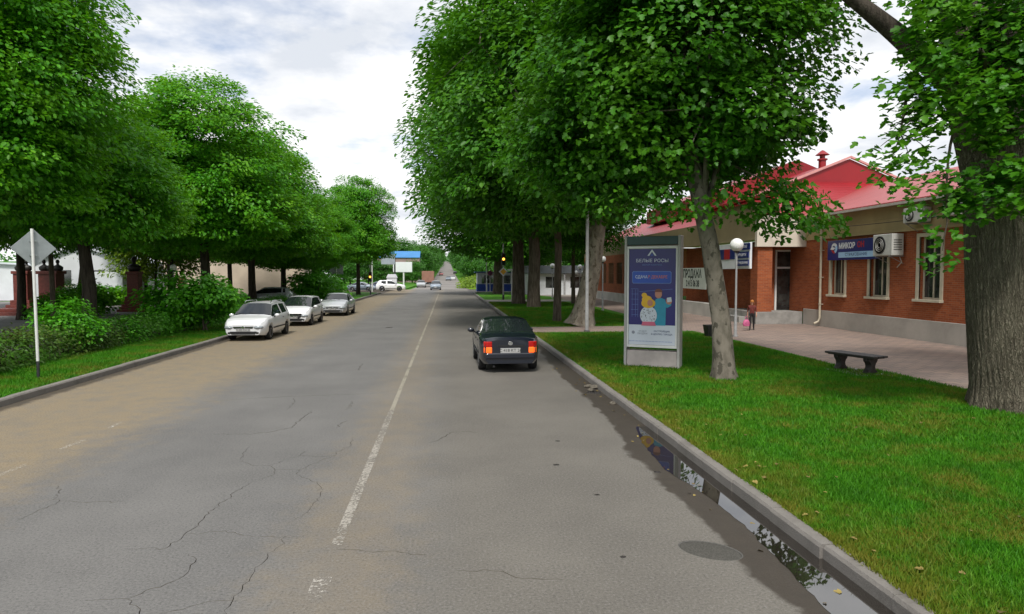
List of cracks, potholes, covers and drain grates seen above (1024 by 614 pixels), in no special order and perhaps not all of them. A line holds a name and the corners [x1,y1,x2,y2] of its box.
crack [459,569,561,580]
manhole cover [678,540,743,561]
crack [132,402,353,613]
crack [89,556,197,614]
